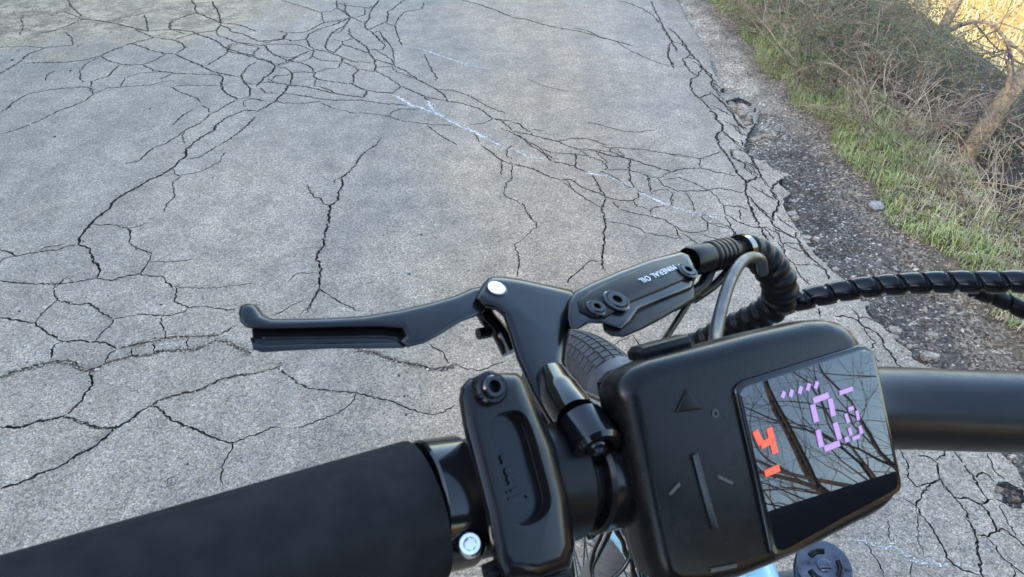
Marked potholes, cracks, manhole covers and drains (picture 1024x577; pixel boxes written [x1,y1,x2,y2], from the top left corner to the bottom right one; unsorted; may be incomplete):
crack [0,0,902,489]
pothole [726,97,759,126]
pothole [994,481,1024,509]
crack [854,450,1024,577]
